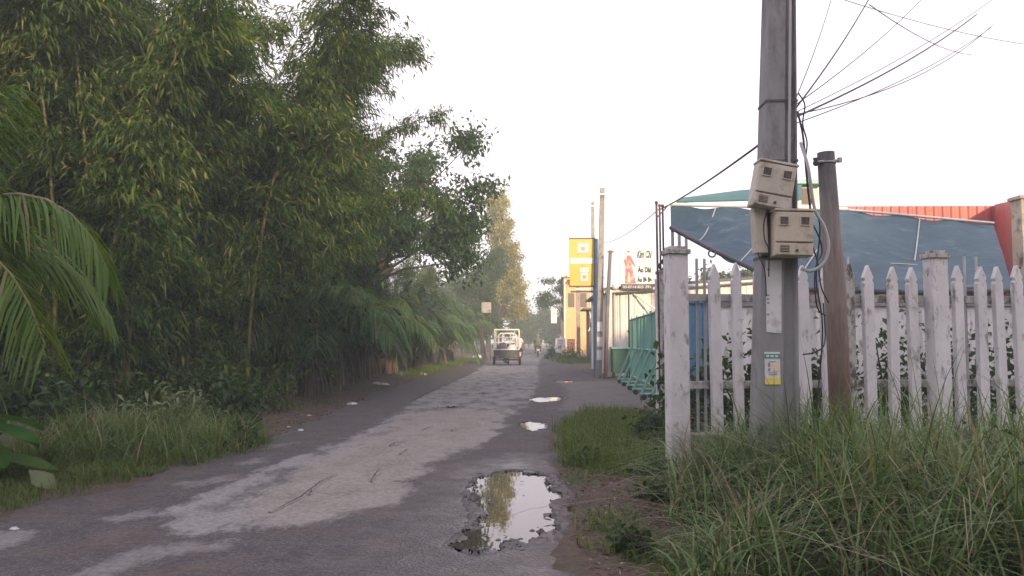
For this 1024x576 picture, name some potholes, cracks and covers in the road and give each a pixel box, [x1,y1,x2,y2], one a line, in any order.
pothole [439,469,596,555]
pothole [513,420,551,432]
